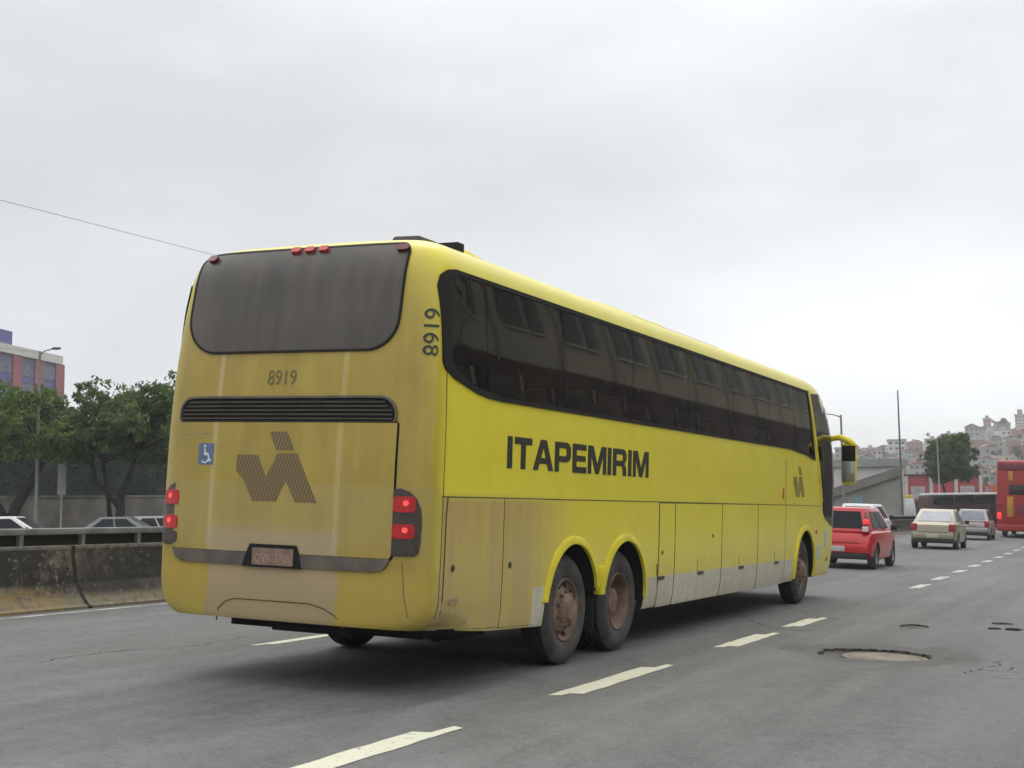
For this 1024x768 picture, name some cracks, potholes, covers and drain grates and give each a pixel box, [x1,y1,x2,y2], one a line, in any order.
crack [945,657,1017,679]
manhole cover [842,652,929,661]
